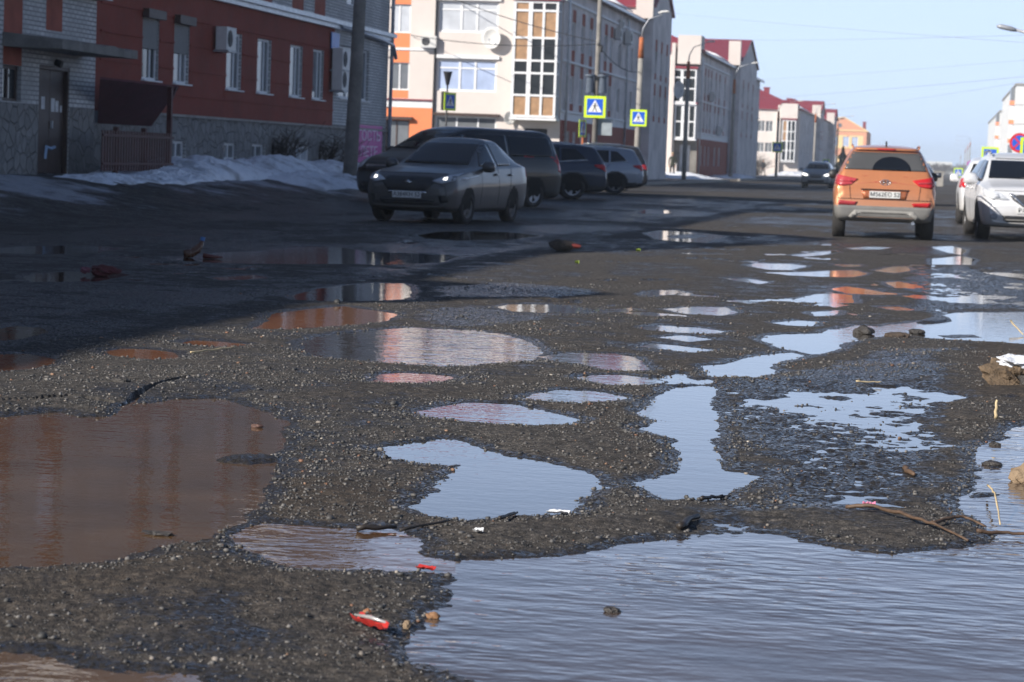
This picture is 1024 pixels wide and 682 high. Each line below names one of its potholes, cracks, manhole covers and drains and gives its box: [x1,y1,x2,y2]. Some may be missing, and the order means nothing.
pothole [757,311,1024,355]
crack [0,375,196,406]
pothole [0,396,295,568]
pothole [411,401,586,425]
pothole [408,231,541,240]
pothole [540,351,663,374]
pothole [295,327,547,366]
pothole [248,305,400,329]
pothole [629,383,770,501]
pothole [393,423,1024,682]
pothole [682,351,806,380]
pothole [288,283,415,301]
